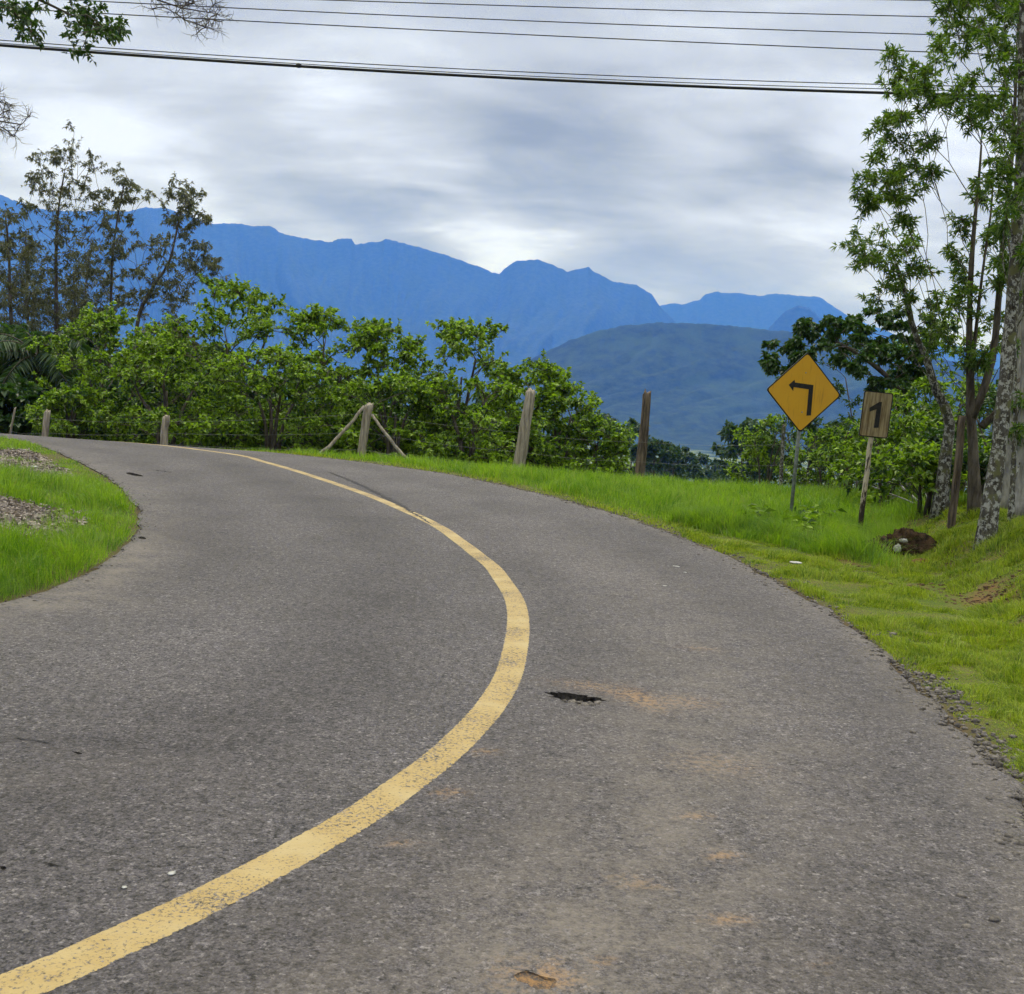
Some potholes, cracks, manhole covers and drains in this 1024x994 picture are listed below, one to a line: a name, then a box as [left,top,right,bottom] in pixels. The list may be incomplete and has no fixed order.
pothole [545,691,606,706]
pothole [514,971,557,990]
